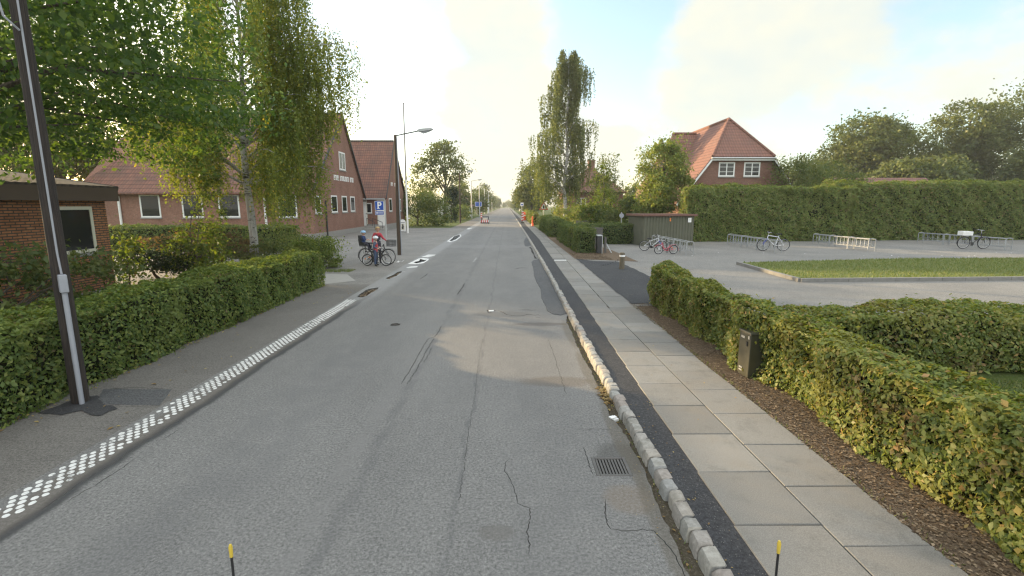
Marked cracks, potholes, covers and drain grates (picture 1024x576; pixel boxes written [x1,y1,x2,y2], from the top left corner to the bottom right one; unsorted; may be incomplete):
crack [604,499,685,576]
crack [504,458,531,554]
crack [460,345,482,497]
crack [401,327,441,384]
drain grate [591,457,633,476]
